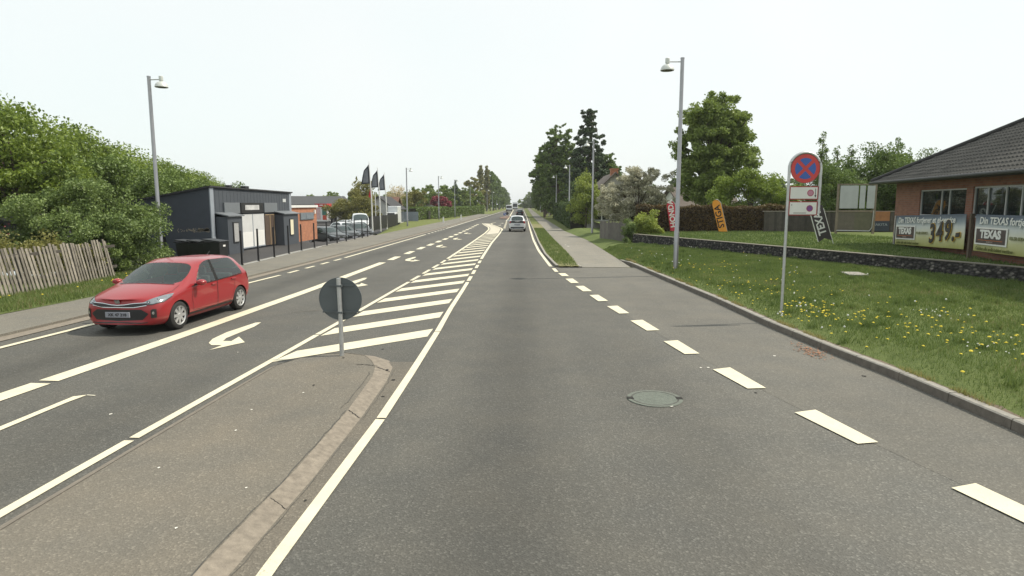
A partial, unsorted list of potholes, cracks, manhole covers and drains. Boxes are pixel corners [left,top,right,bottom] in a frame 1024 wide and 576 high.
manhole cover [627,390,683,407]
